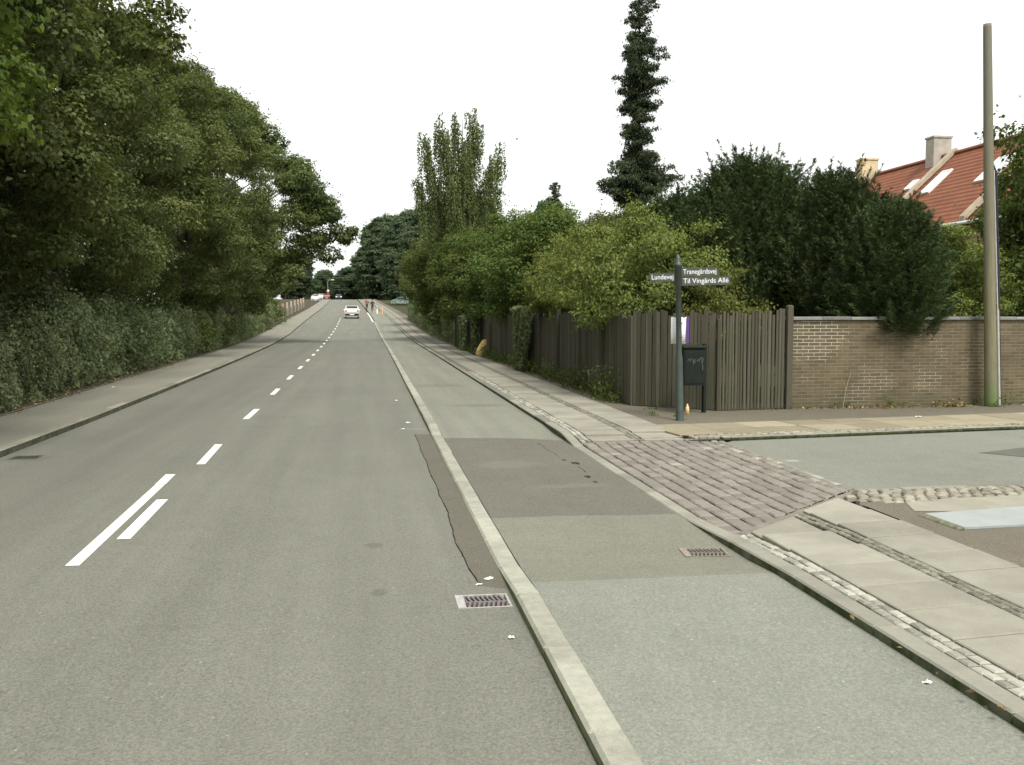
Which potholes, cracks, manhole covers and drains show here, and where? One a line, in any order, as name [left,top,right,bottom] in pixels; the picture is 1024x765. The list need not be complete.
drain grate [455,593,512,609]
drain grate [678,548,731,557]
crack [415,435,480,583]
